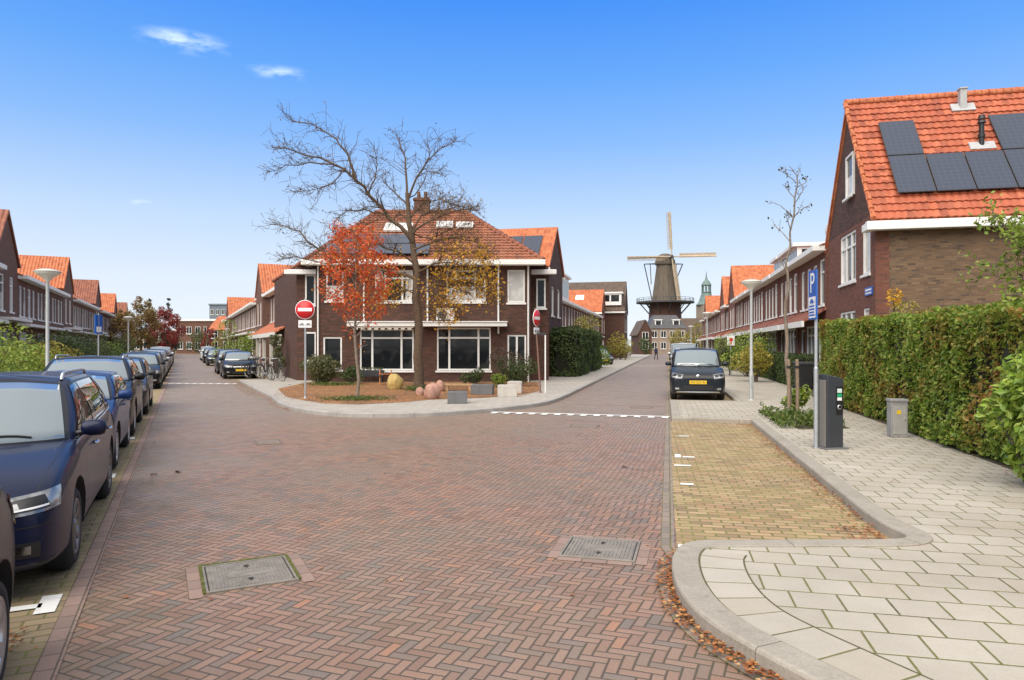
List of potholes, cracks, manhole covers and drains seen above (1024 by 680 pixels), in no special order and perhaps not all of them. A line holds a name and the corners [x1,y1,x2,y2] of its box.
manhole cover [558,536,641,562]
manhole cover [198,554,301,595]
